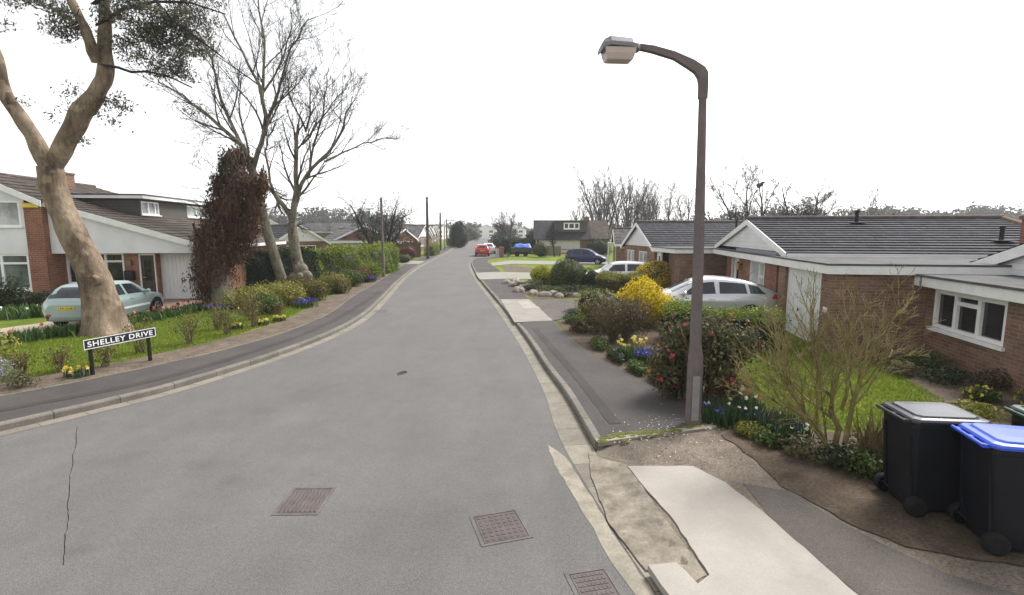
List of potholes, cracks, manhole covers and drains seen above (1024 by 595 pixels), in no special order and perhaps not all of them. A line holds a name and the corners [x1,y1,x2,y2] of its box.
crack [62,429,77,565]
manhole cover [564,566,624,595]
manhole cover [469,508,534,547]
